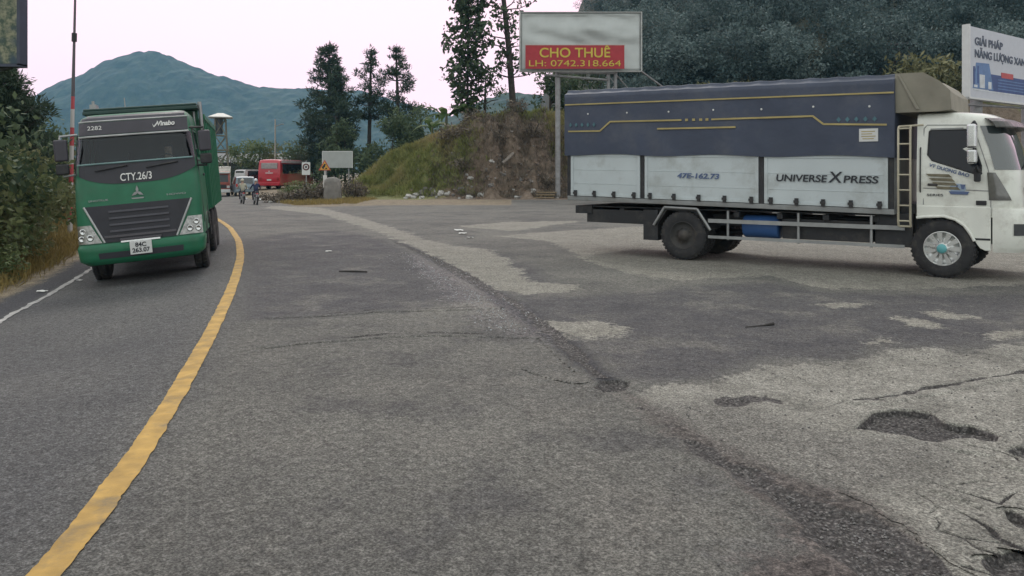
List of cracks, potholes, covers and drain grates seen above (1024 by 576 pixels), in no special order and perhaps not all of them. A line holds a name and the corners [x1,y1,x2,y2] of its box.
pothole [838,406,1017,446]
pothole [696,389,805,415]
crack [623,368,1024,576]
crack [257,305,544,349]
pothole [582,377,643,397]
